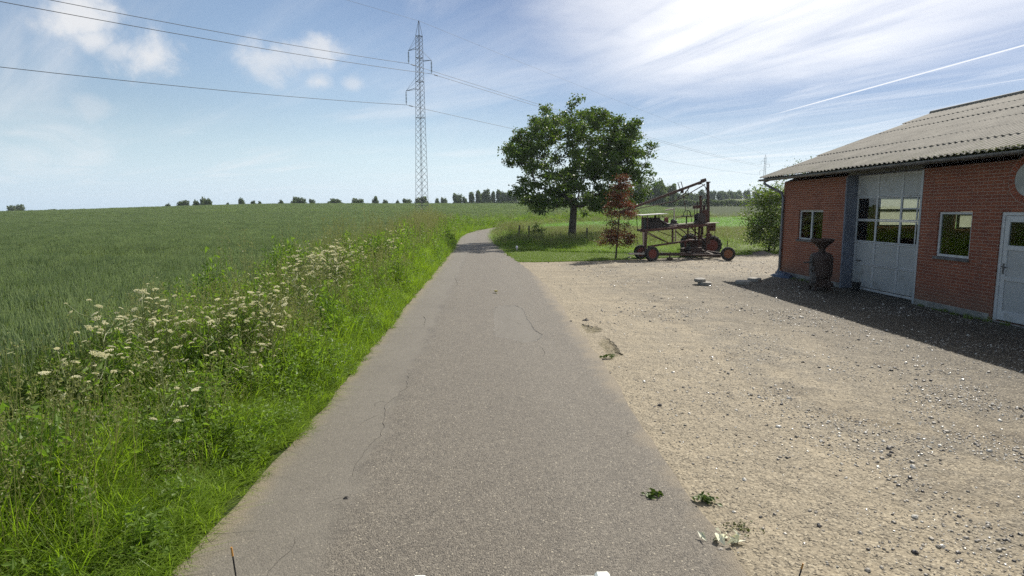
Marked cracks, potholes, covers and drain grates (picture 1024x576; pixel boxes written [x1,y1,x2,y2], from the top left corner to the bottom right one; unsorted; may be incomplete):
crack [352,377,409,474]
